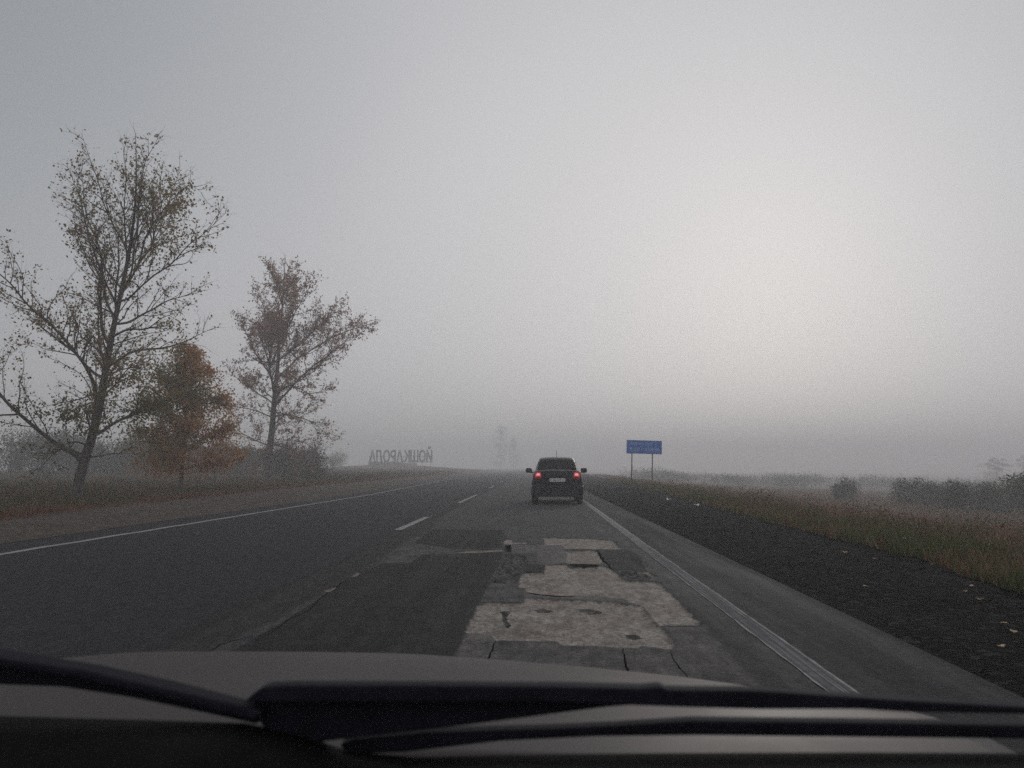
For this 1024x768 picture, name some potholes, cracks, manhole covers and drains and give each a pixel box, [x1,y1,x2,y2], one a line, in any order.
pothole [500,611,512,629]
crack [210,564,376,651]
